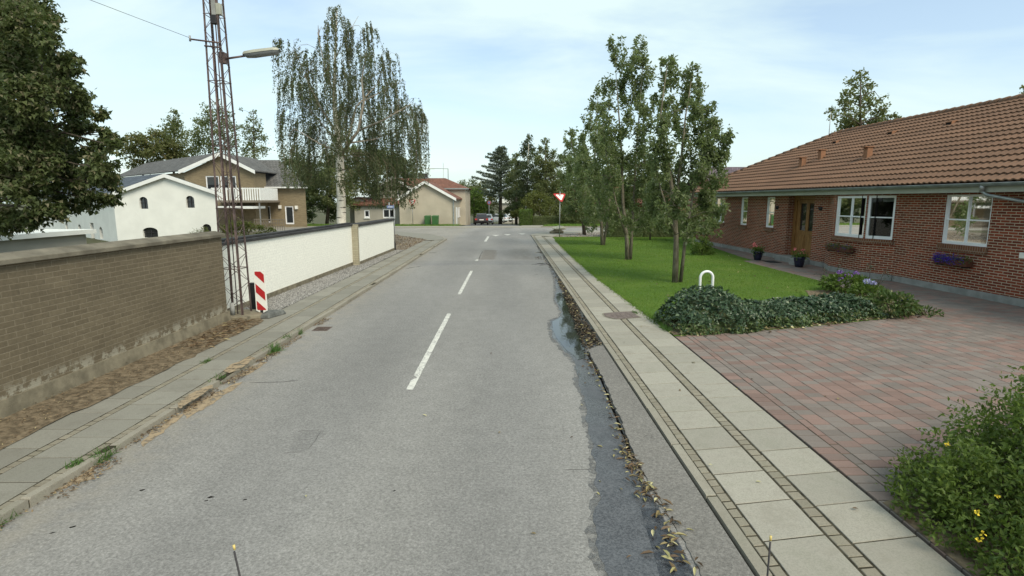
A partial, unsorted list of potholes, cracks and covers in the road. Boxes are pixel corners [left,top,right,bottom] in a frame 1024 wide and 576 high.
manhole cover [602,311,640,319]
crack [587,352,631,454]
